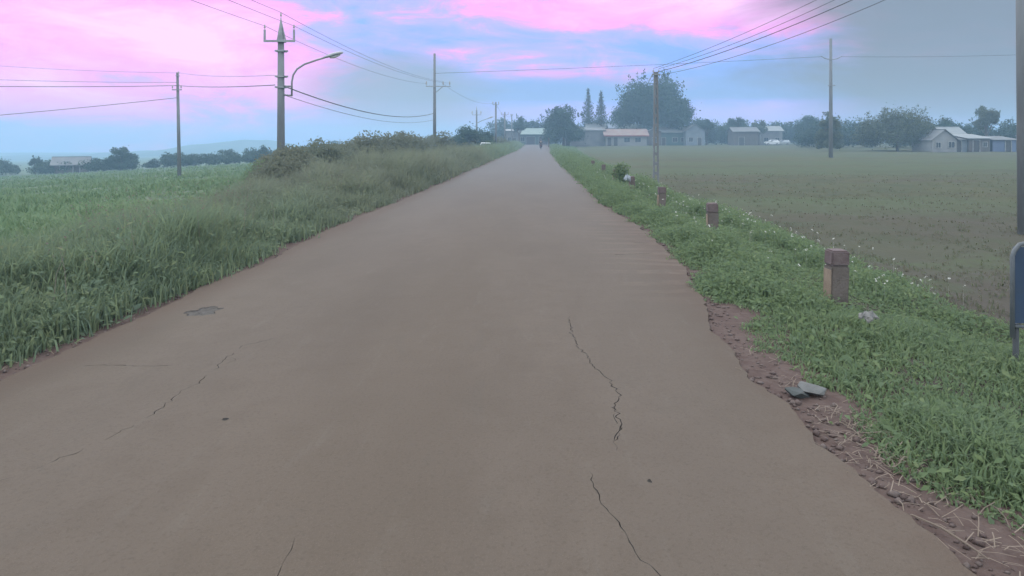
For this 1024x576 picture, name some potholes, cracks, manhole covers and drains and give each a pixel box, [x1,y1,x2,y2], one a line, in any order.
crack [569,320,622,450]
crack [590,473,661,576]
crack [0,338,273,481]
